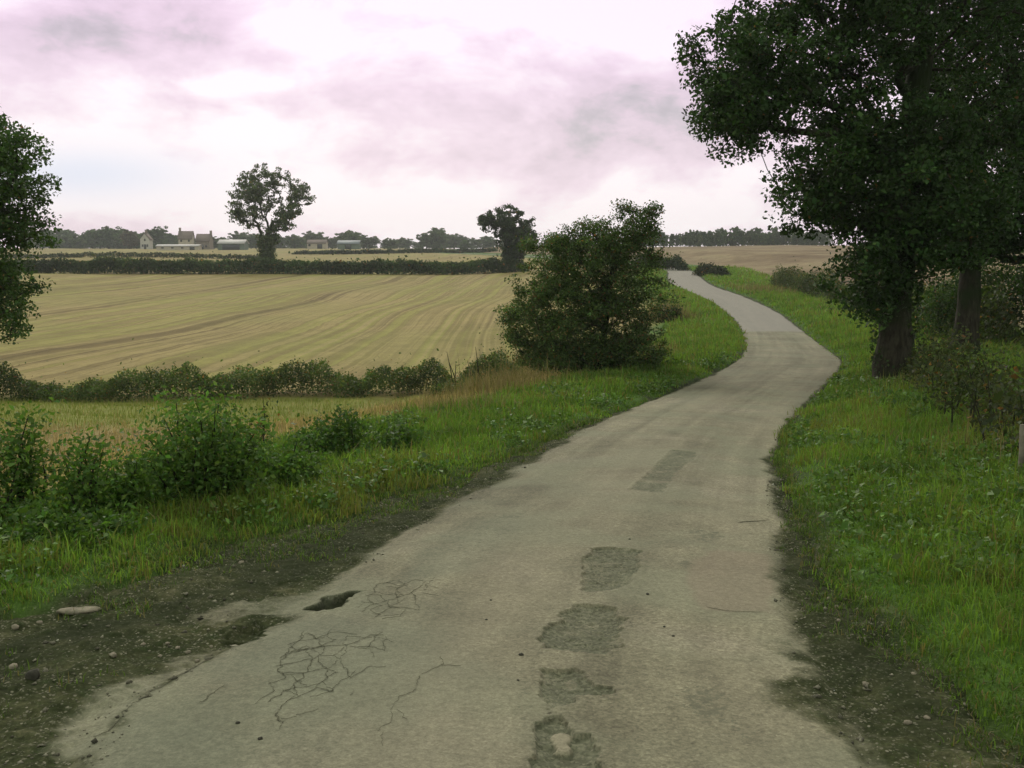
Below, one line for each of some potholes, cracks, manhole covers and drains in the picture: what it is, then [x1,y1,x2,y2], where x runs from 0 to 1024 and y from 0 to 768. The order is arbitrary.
pothole [298,588,373,613]
pothole [202,610,284,654]
crack [255,577,438,728]
crack [378,658,460,746]
